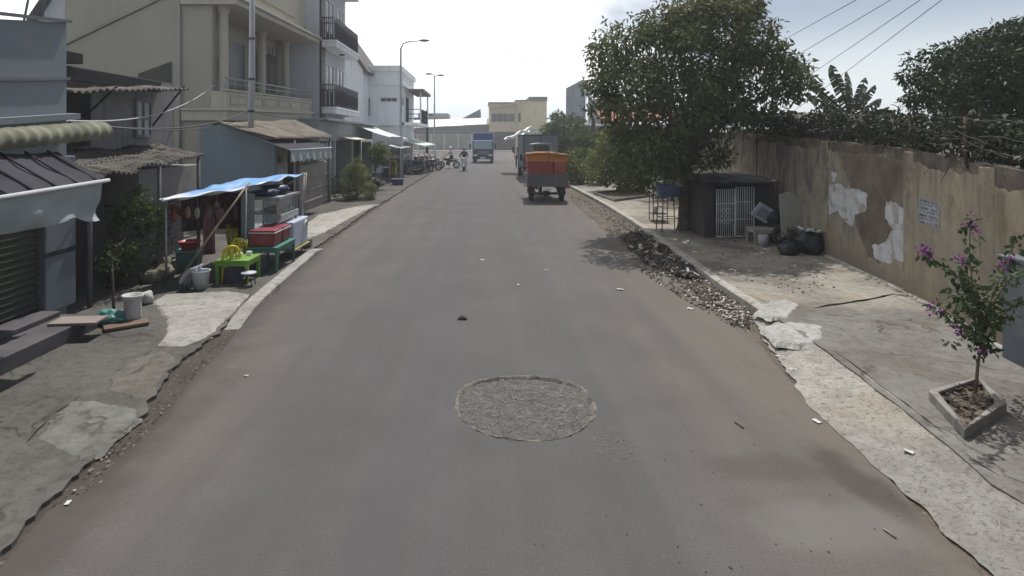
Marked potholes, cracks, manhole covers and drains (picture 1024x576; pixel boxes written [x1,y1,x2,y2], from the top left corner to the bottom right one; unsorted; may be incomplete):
crack [26,397,78,443]
crack [751,294,894,308]
